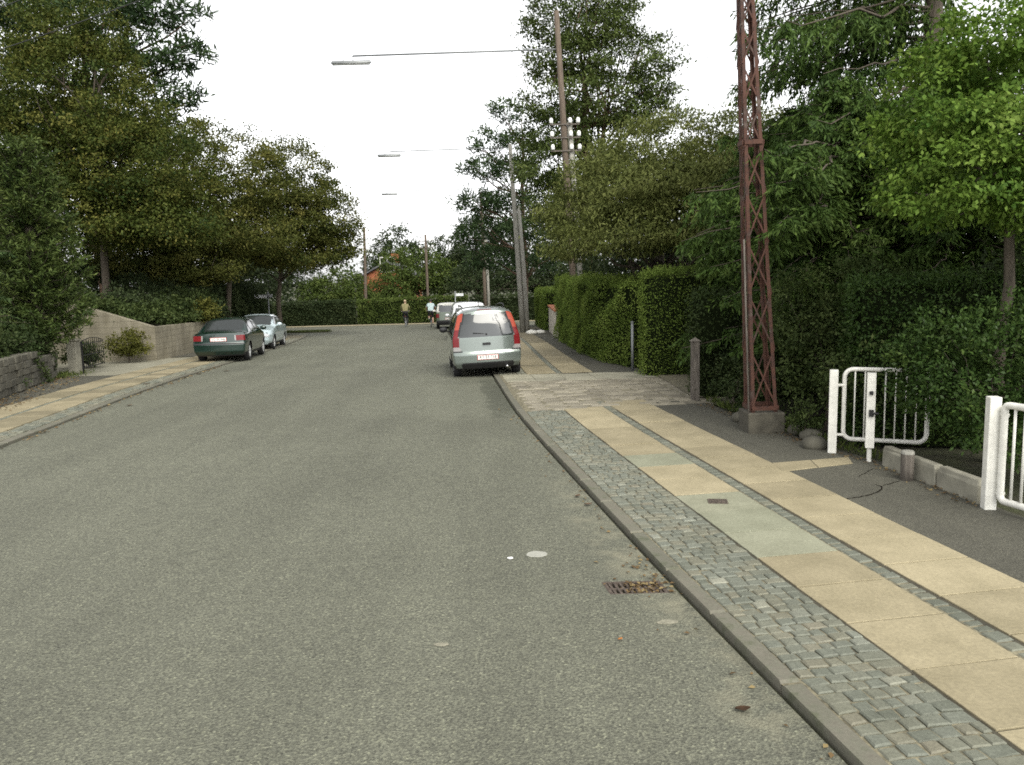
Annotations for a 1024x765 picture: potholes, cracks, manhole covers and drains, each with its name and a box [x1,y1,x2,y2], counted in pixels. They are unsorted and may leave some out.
drain grate [602,580,670,594]
